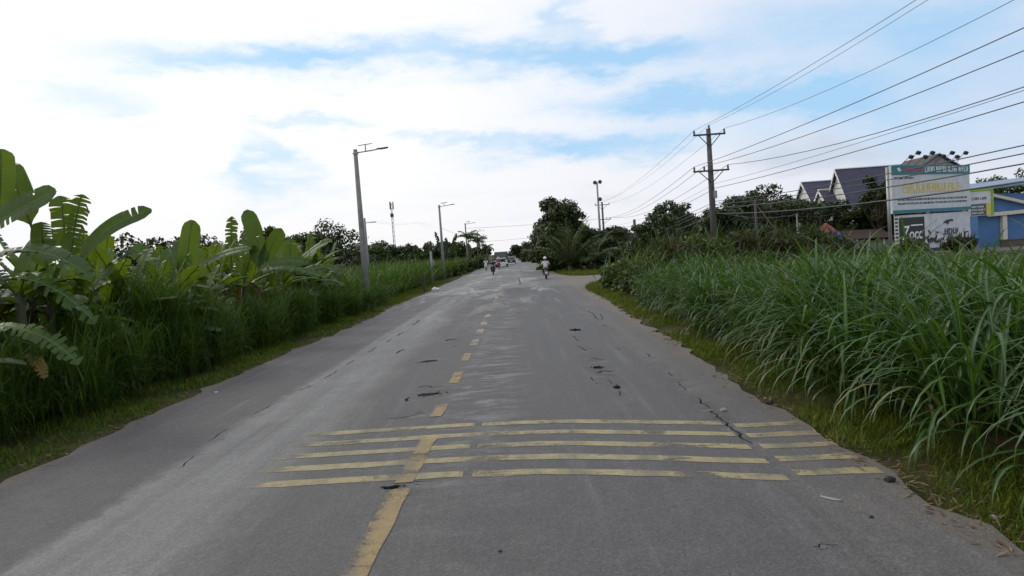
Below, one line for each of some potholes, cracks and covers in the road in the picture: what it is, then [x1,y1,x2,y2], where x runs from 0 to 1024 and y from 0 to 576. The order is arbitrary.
crack [390,385,449,419]
